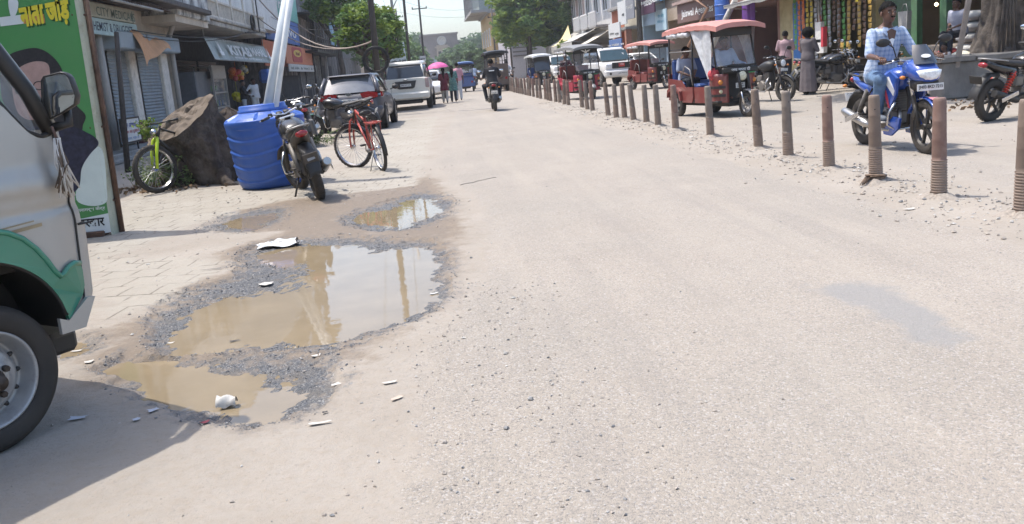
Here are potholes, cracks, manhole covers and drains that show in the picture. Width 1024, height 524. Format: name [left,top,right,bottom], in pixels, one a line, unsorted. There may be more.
pothole [83,348,355,431]
pothole [193,205,295,234]
pothole [135,233,461,362]
pothole [339,191,460,232]
